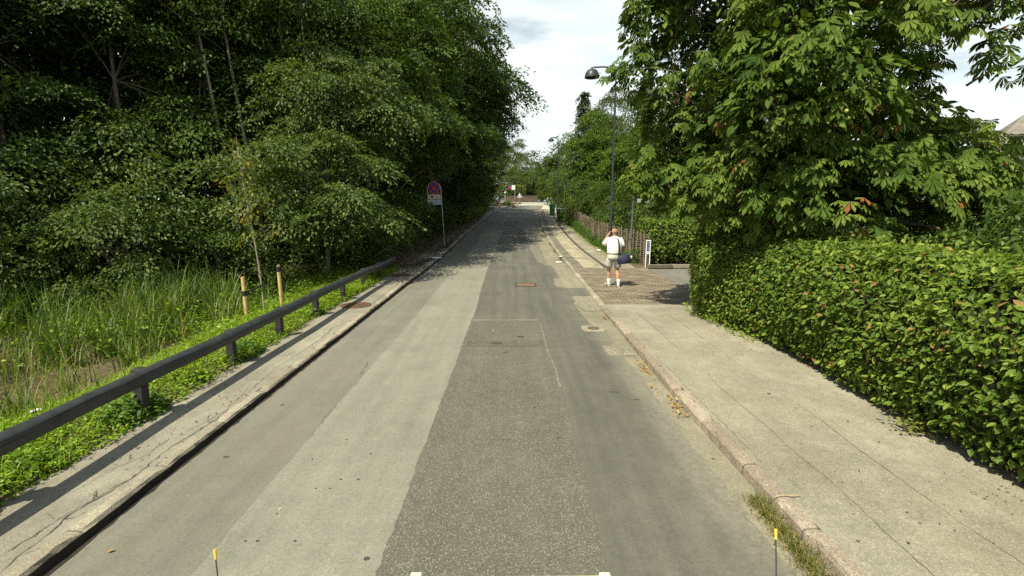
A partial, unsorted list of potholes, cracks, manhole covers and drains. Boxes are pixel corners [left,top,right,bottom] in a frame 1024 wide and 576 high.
crack [0,321,347,572]
